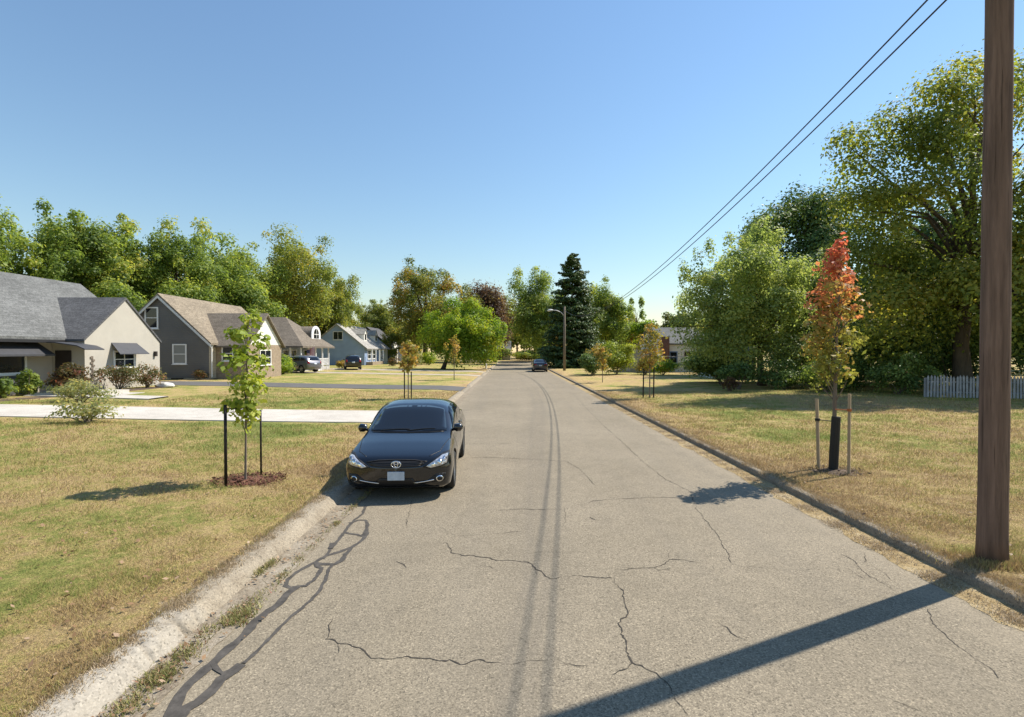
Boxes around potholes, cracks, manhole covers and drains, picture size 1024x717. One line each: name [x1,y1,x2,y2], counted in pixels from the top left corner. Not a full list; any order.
crack [443,528,685,711]
crack [927,610,998,677]
crack [579,400,809,570]
crack [326,618,589,685]
